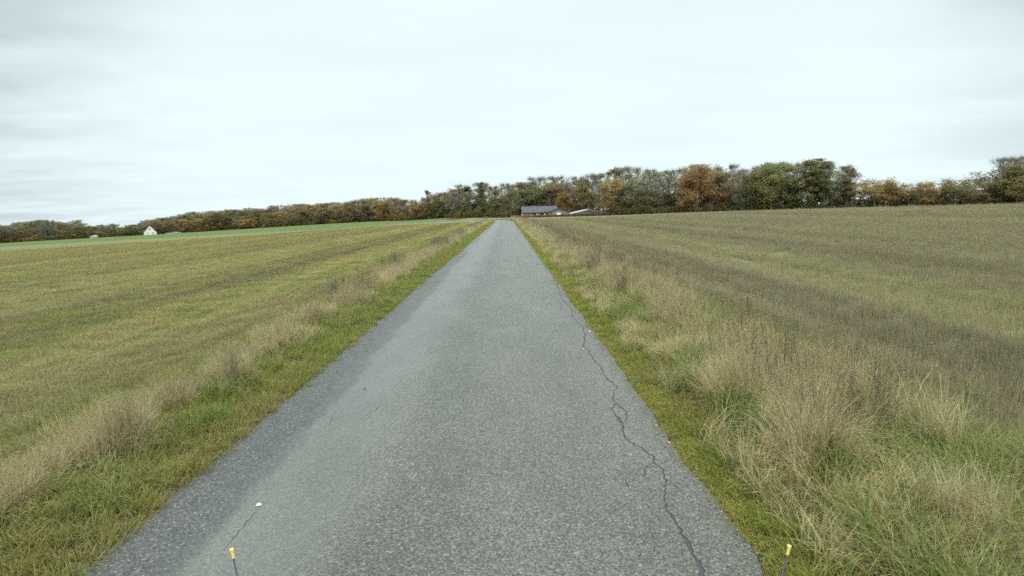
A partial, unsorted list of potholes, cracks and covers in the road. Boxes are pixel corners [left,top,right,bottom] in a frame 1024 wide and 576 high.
crack [557,286,741,576]
